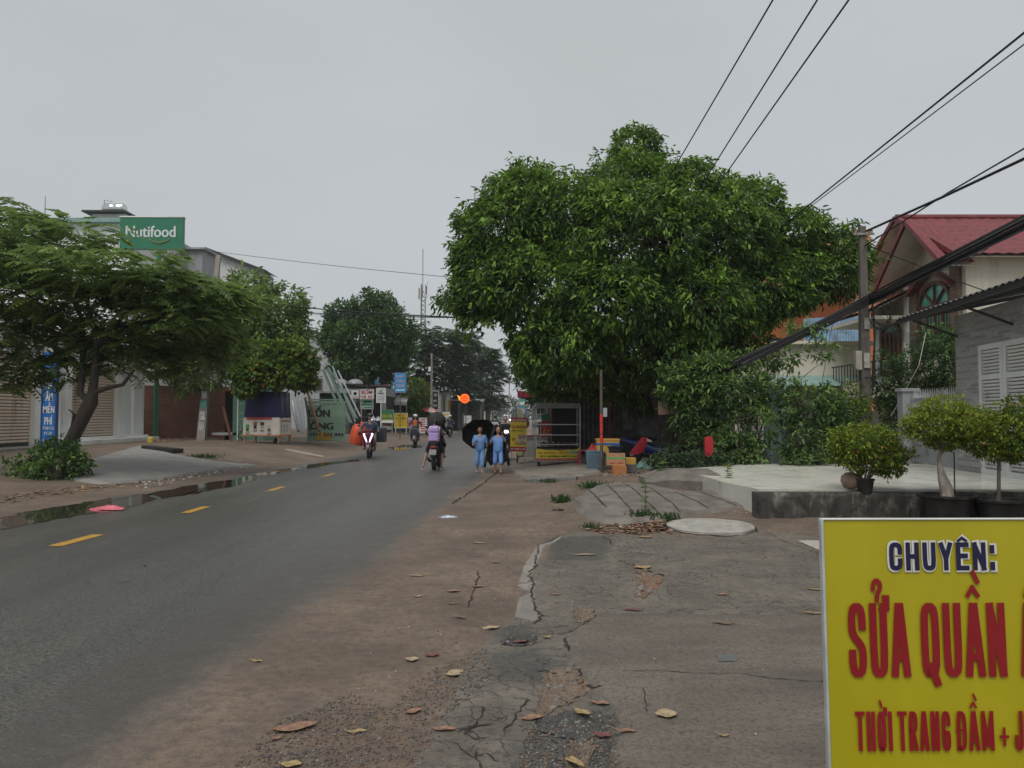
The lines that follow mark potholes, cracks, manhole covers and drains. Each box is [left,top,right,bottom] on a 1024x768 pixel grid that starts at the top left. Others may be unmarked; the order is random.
manhole cover [666,518,755,537]
pothole [534,669,591,718]
pothole [501,634,537,647]
crack [528,535,595,651]
pothole [634,570,663,598]
crack [450,697,534,768]
crack [625,670,823,681]
